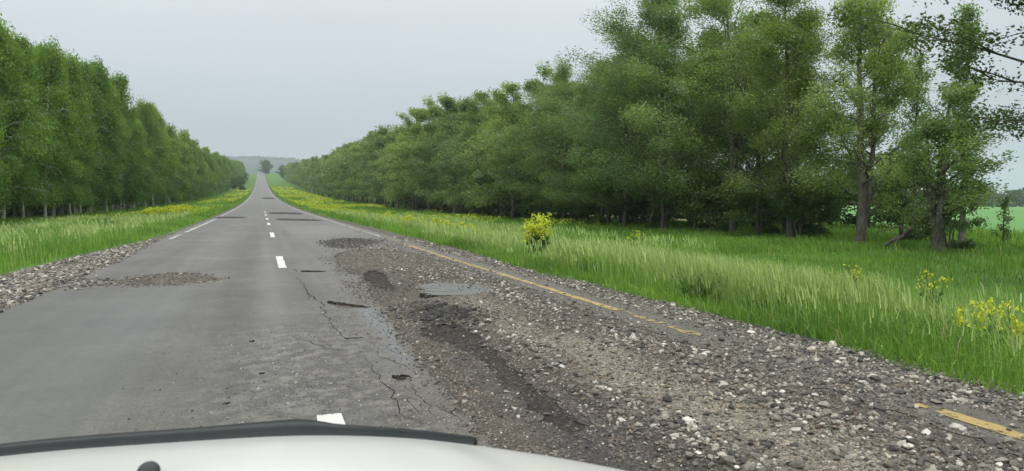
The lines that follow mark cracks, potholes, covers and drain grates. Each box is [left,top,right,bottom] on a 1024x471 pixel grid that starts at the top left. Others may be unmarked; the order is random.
crack [365,348,463,422]
pothole [333,249,1024,471]
pothole [108,272,218,287]
